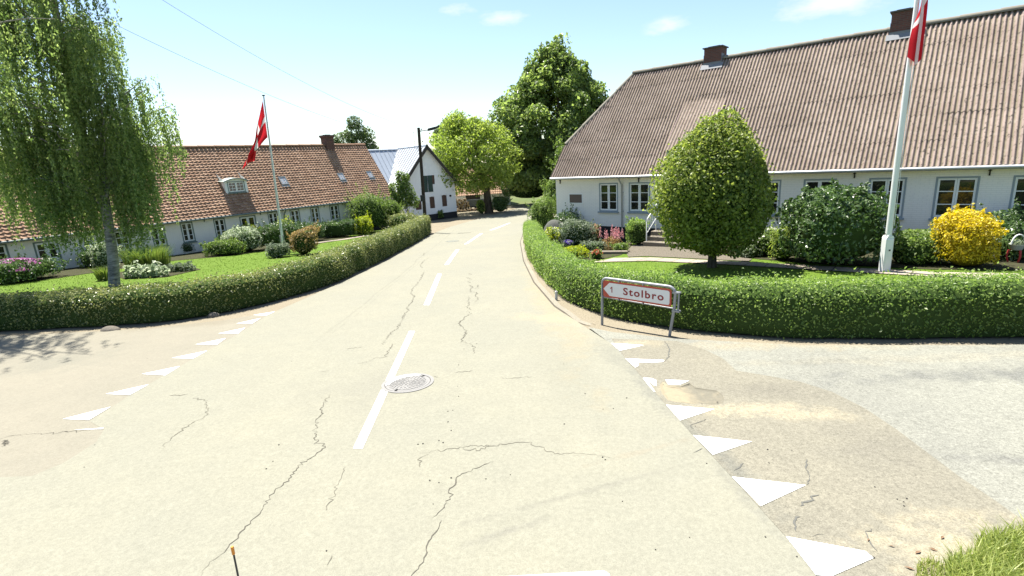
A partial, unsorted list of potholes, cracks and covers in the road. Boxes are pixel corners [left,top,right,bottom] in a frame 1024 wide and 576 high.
crack [202,394,331,574]
crack [793,459,817,536]
crack [412,442,611,574]
manhole cover [381,373,434,393]
